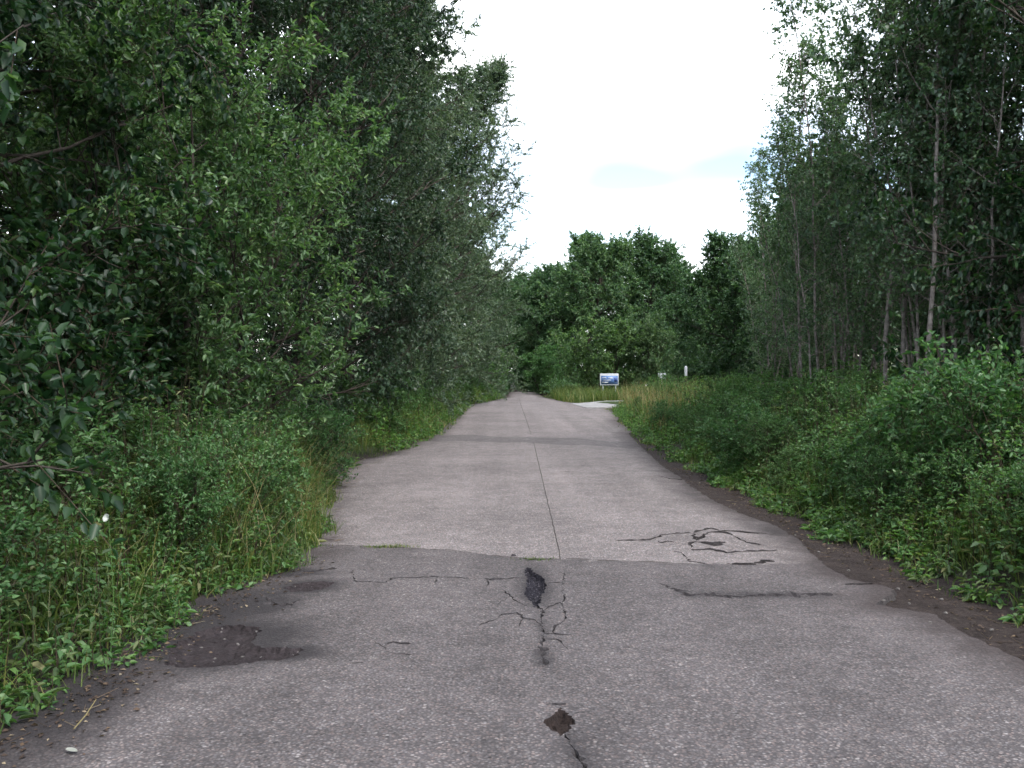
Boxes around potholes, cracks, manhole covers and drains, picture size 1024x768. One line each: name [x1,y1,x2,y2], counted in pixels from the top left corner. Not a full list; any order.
crack [293,567,467,583]
crack [345,400,777,666]
pothole [524,567,547,607]
crack [564,734,588,768]
pothole [165,624,304,668]
pothole [543,707,575,736]
crack [662,583,872,598]
